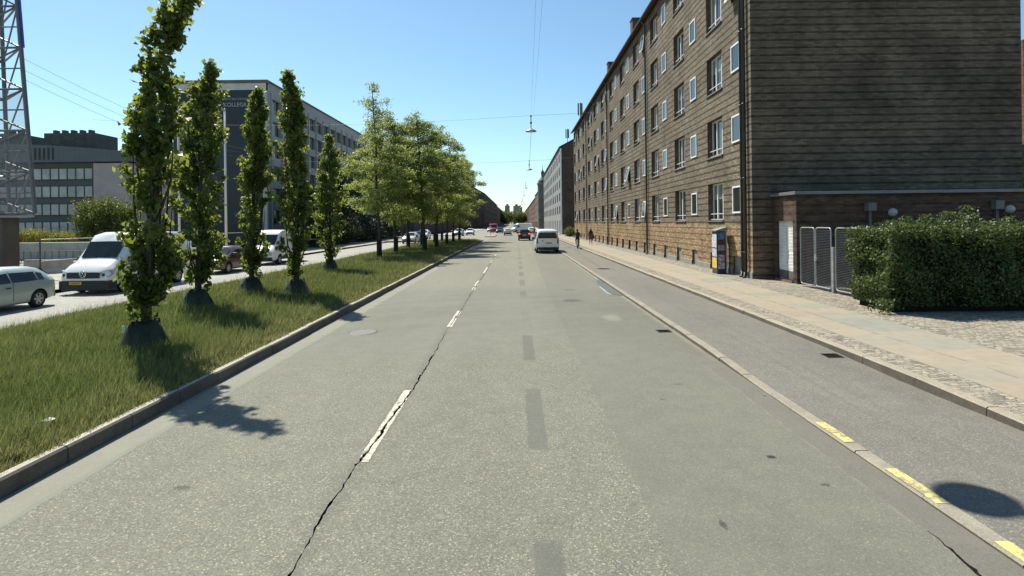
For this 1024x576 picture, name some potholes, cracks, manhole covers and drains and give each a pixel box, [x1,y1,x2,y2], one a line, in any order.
crack [928,531,982,576]
crack [288,265,490,576]
